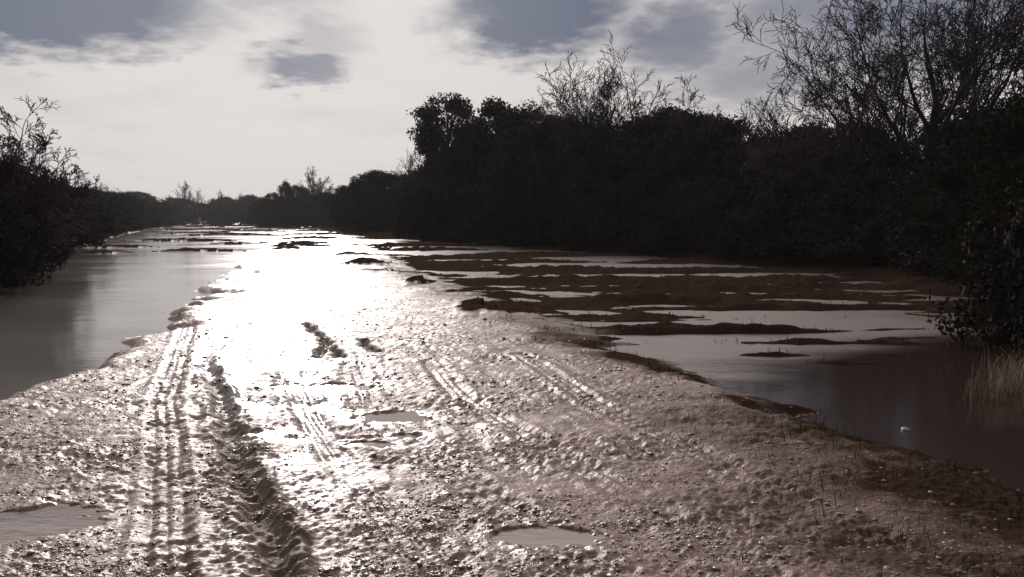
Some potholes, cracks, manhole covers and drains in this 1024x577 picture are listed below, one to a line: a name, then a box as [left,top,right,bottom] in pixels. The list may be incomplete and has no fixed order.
pothole [482,519,613,554]
pothole [0,496,128,554]
pothole [334,408,452,428]
pothole [339,439,404,448]
